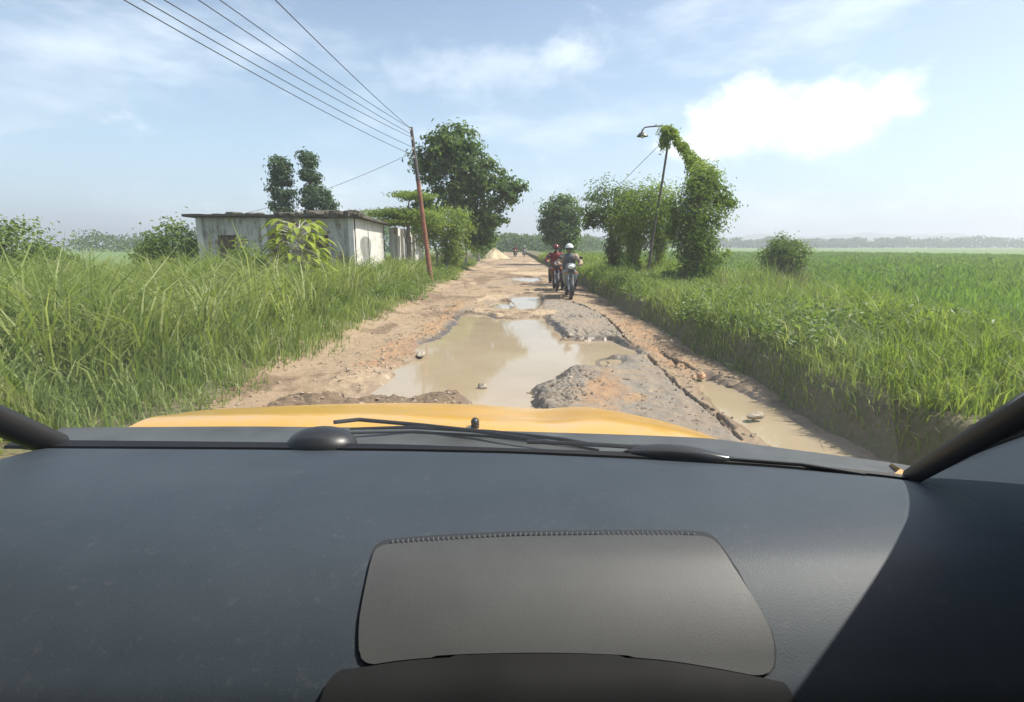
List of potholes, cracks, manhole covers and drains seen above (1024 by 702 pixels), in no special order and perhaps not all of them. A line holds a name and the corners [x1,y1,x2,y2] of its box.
pothole [507,293,546,309]
pothole [356,309,647,409]
pothole [485,298,514,309]
crack [555,297,748,442]
